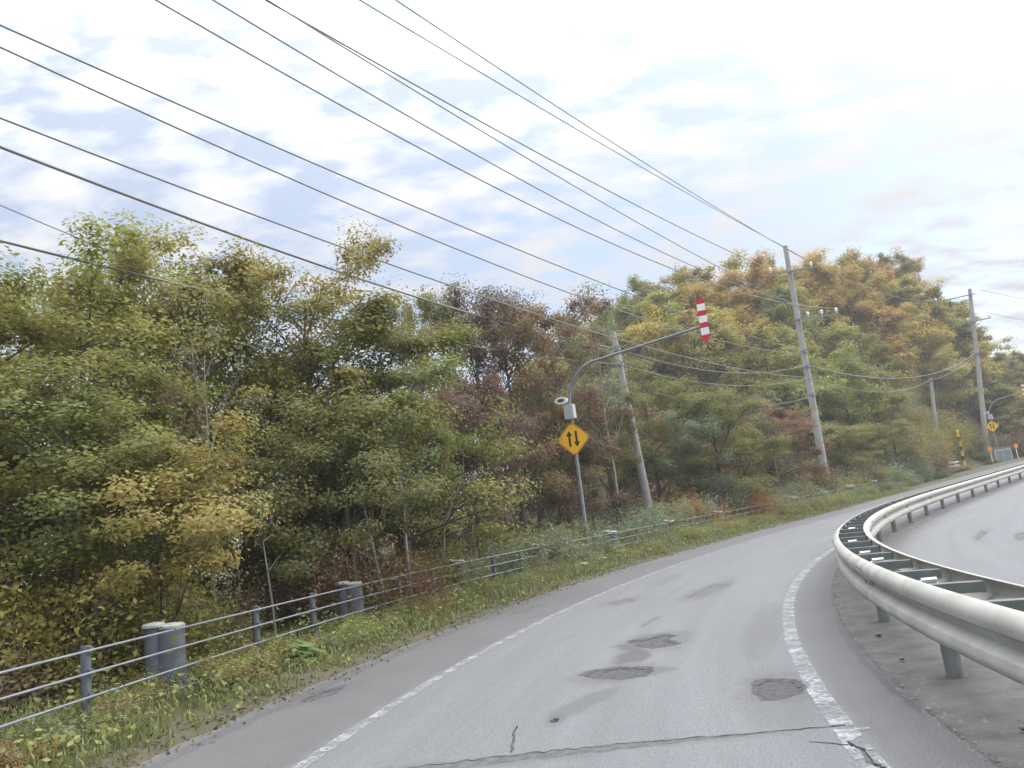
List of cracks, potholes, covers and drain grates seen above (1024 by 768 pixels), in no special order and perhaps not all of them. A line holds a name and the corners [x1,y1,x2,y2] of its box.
crack [408,725,886,768]
